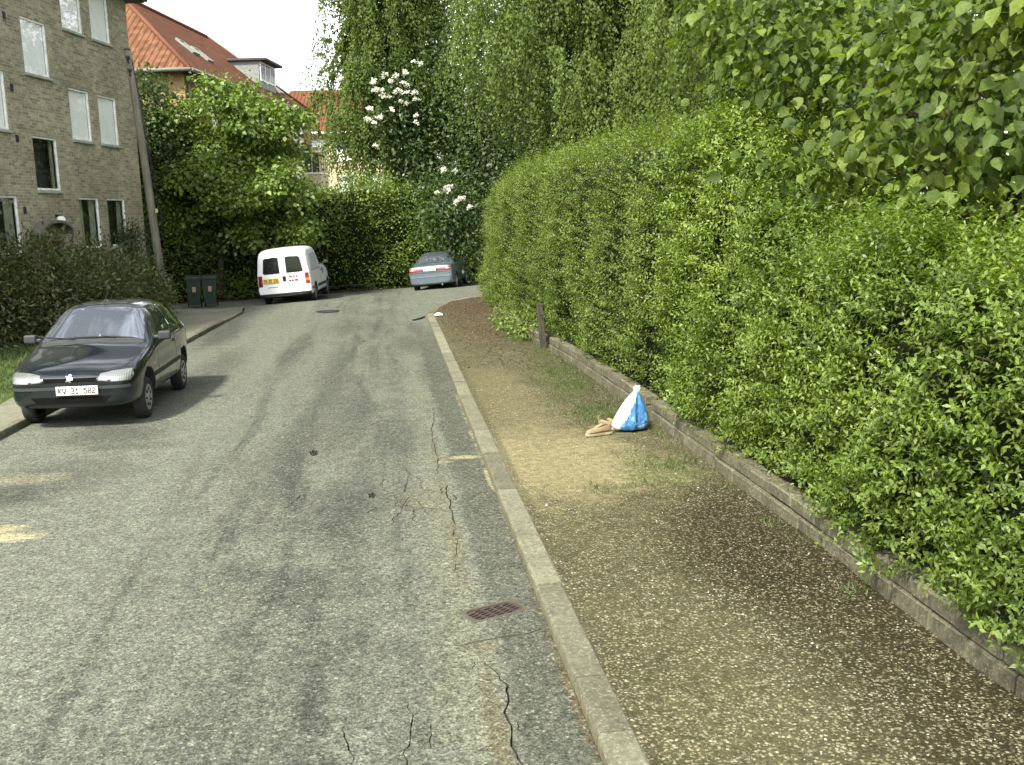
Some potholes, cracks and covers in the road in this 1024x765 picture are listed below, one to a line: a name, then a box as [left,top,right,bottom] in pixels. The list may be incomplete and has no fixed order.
crack [402,701,439,765]
drain grate [460,599,529,623]
crack [352,405,458,573]
crack [440,628,543,765]
crack [342,730,359,764]
